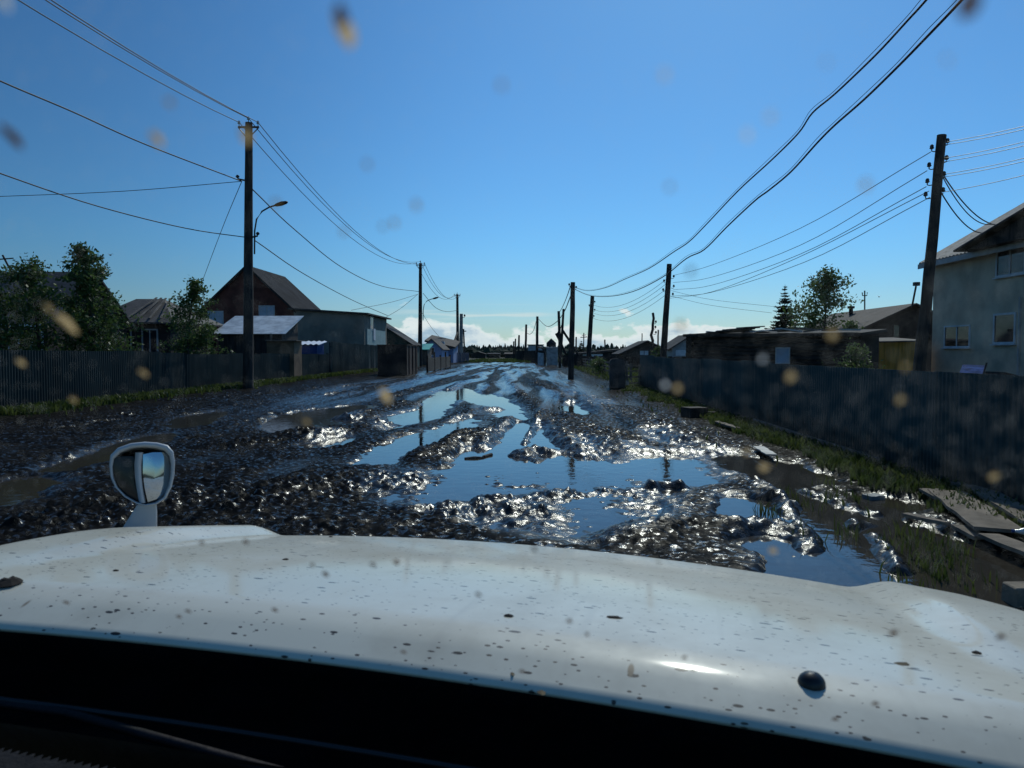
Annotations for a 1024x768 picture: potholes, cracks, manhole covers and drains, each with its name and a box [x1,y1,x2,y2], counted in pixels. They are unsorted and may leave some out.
pothole [420,385,549,420]
pothole [774,490,900,587]
pothole [546,398,610,416]
pothole [236,401,397,435]
pothole [322,438,744,554]
pothole [0,470,112,512]
pothole [696,441,858,514]
pothole [419,414,550,473]
